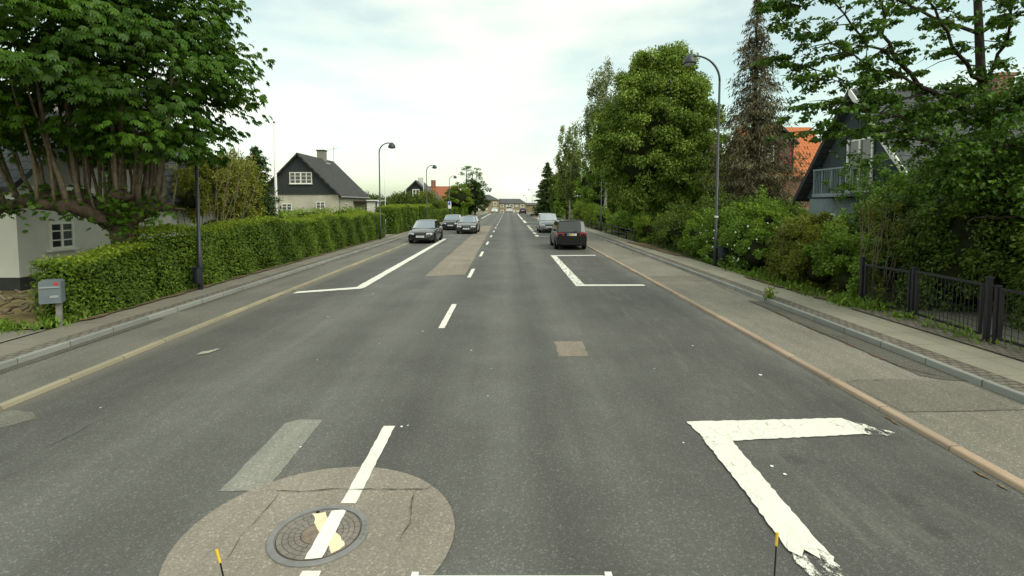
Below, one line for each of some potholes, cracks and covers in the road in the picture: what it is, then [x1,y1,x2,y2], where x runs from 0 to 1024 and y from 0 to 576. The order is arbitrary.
manhole cover [266,505,369,568]
crack [227,486,431,558]
